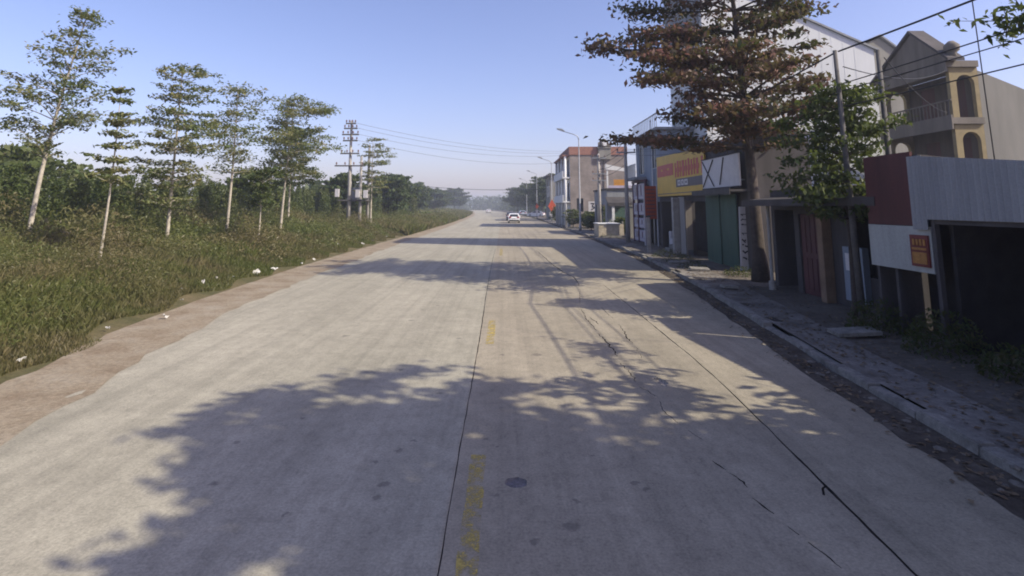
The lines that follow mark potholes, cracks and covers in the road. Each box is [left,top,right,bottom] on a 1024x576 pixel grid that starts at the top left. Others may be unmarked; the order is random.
crack [541,254,918,576]
